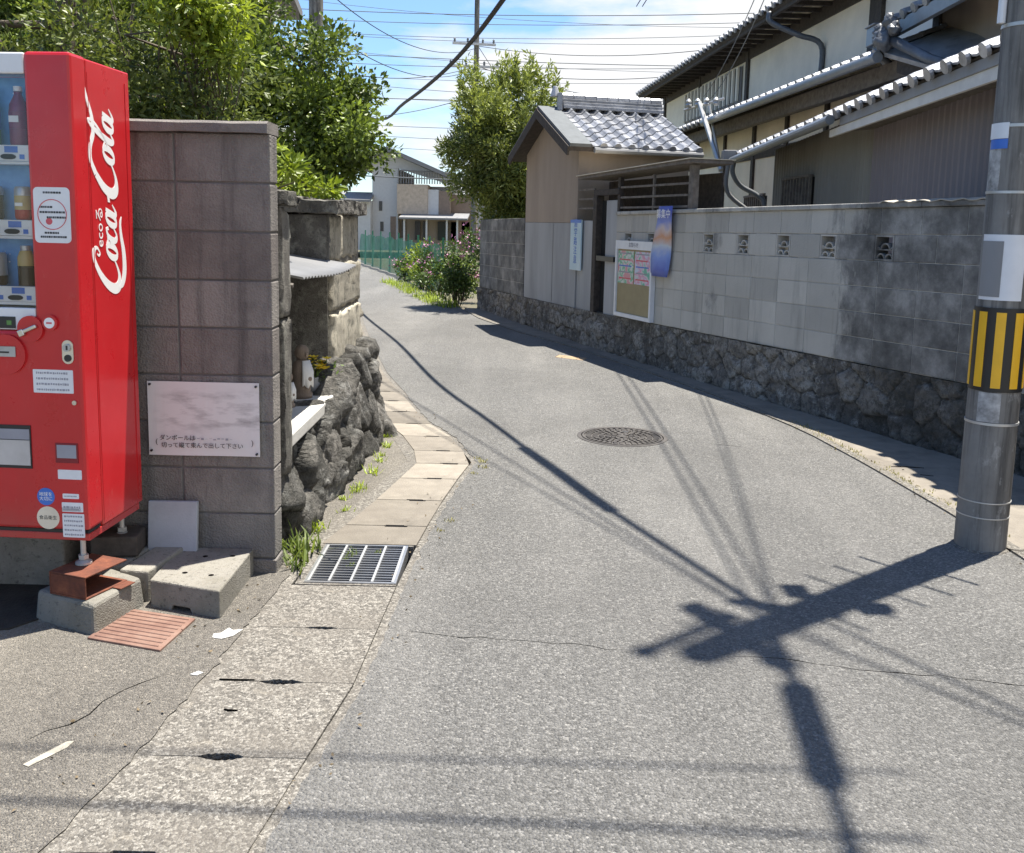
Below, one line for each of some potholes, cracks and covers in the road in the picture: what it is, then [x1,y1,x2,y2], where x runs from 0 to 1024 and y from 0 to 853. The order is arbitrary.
crack [26,676,161,741]
crack [742,656,1024,686]
manhole cover [577,427,668,447]
crack [412,631,617,650]
drain grate [304,544,408,587]
